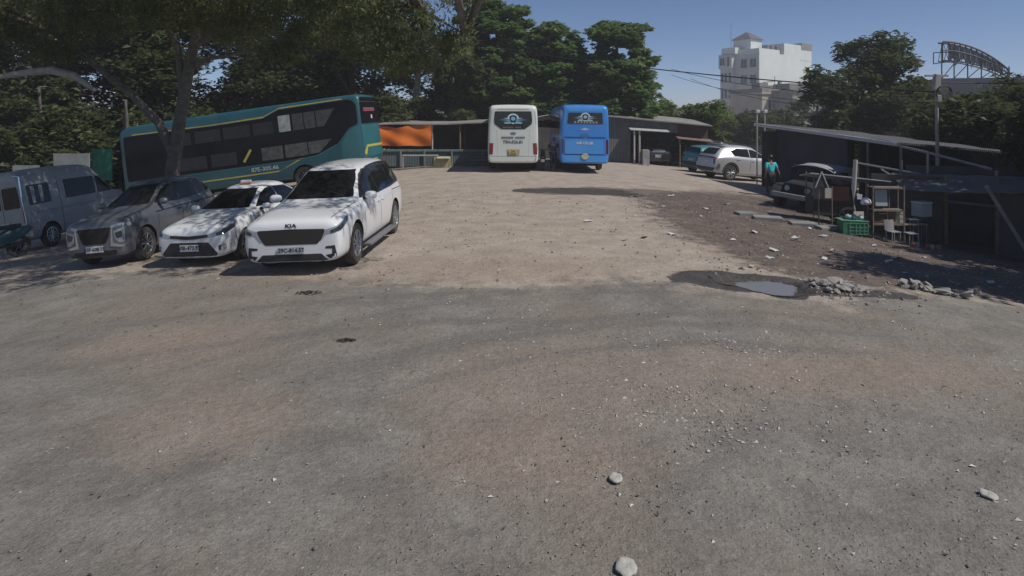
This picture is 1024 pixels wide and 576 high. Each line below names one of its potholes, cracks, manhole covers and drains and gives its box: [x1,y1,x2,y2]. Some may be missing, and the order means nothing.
pothole [707,273,823,297]
